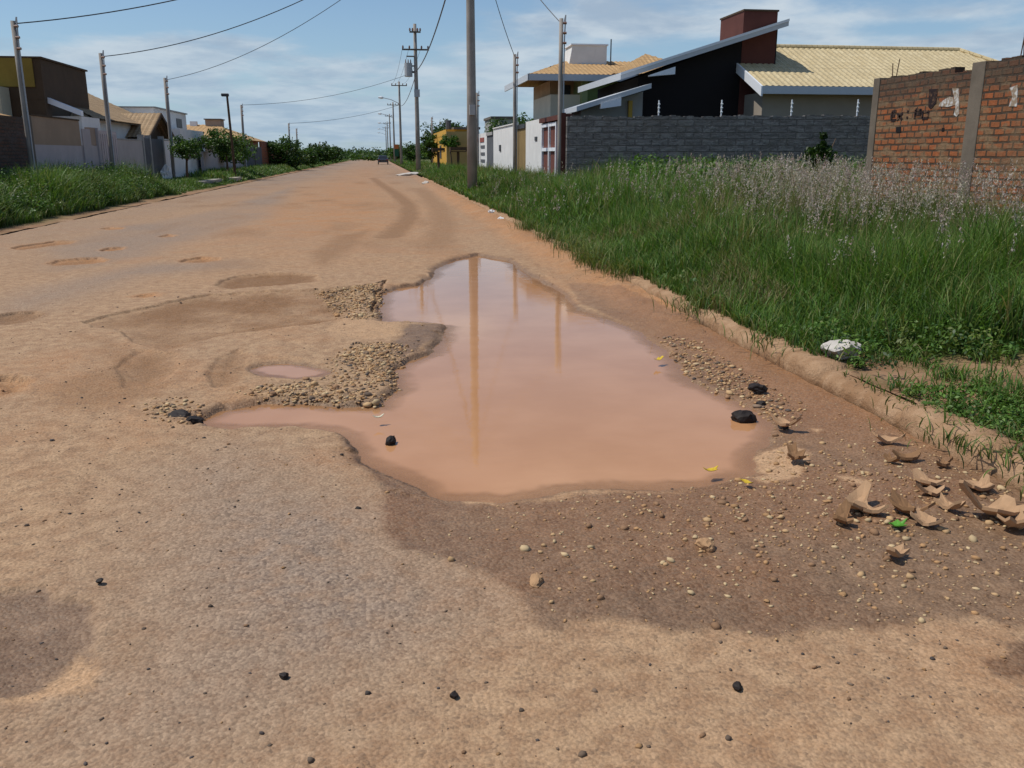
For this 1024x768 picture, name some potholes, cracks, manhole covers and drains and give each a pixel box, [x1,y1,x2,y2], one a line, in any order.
pothole [186,253,780,506]
pothole [44,257,111,266]
pothole [78,285,364,352]
pothole [9,240,79,250]
